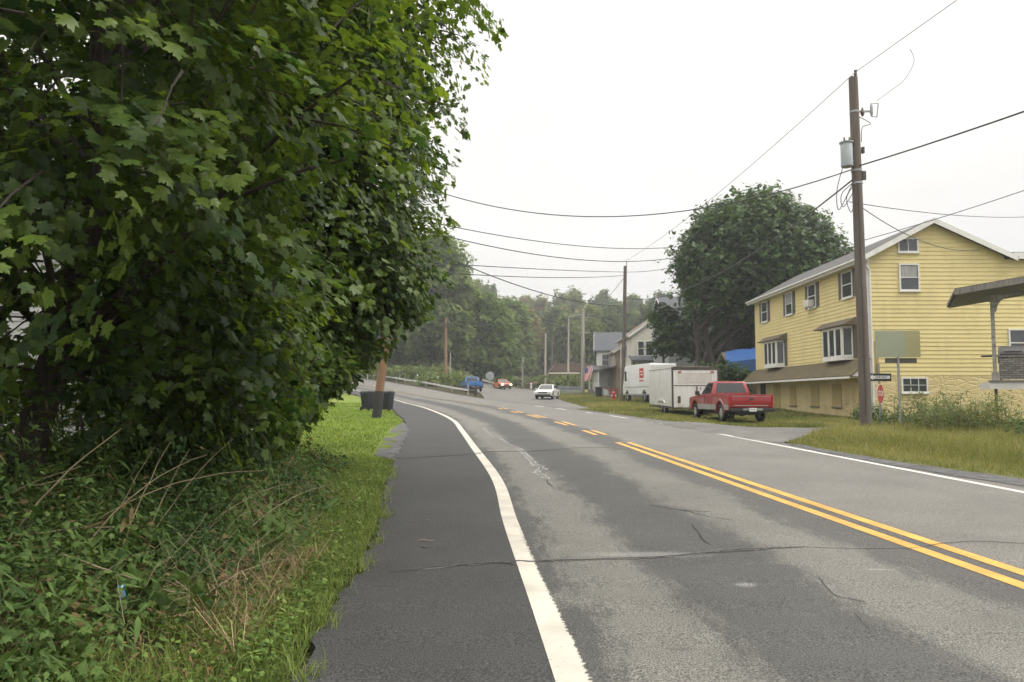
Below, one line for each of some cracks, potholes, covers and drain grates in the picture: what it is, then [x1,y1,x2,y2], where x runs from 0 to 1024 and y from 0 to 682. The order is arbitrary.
crack [396,428,596,487]
crack [389,505,1011,572]
